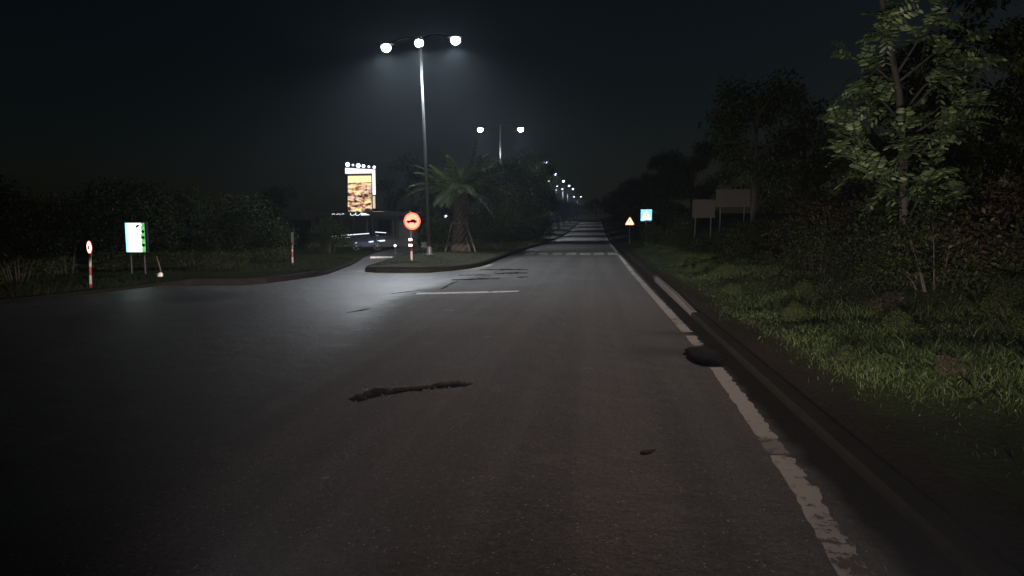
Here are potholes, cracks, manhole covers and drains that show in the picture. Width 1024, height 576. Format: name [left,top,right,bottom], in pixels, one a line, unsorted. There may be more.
pothole [683,346,728,367]
pothole [340,379,474,405]
